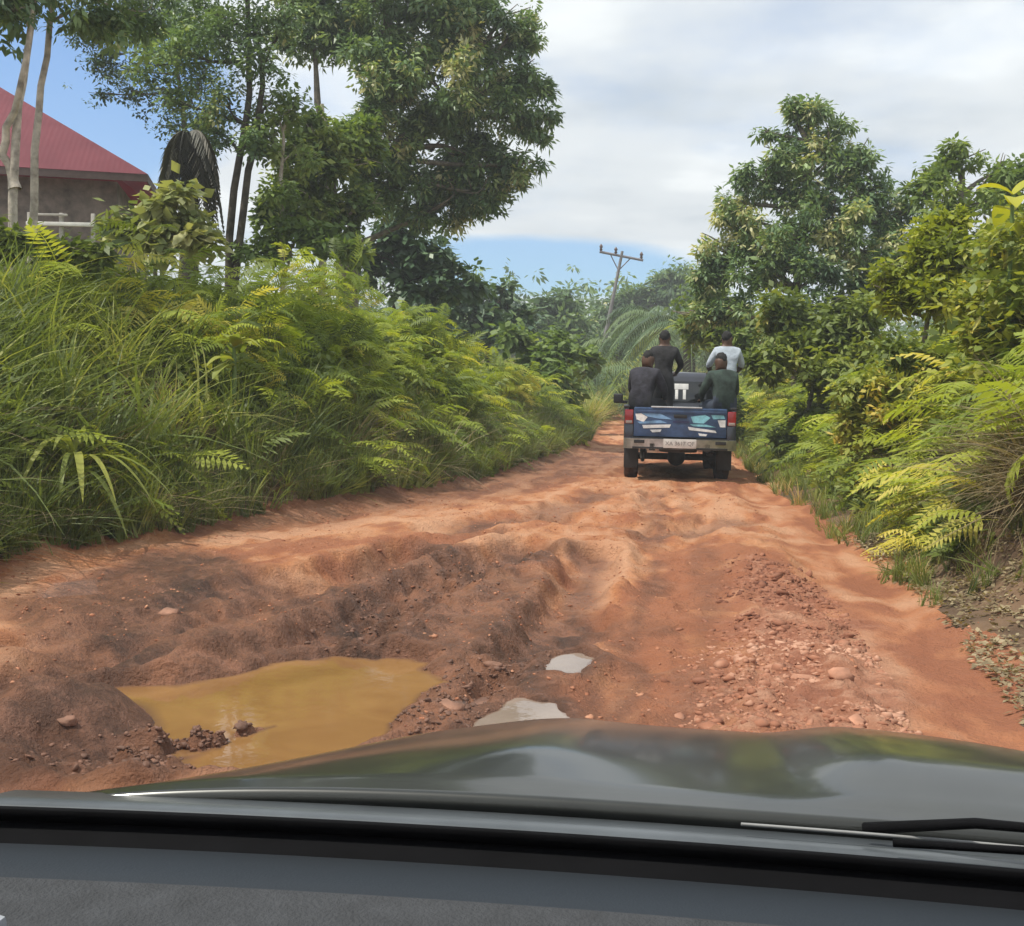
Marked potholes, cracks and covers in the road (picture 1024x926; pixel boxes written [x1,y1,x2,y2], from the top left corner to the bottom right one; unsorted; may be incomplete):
pothole [0,639,453,778]
pothole [464,694,572,728]
pothole [542,650,597,673]
